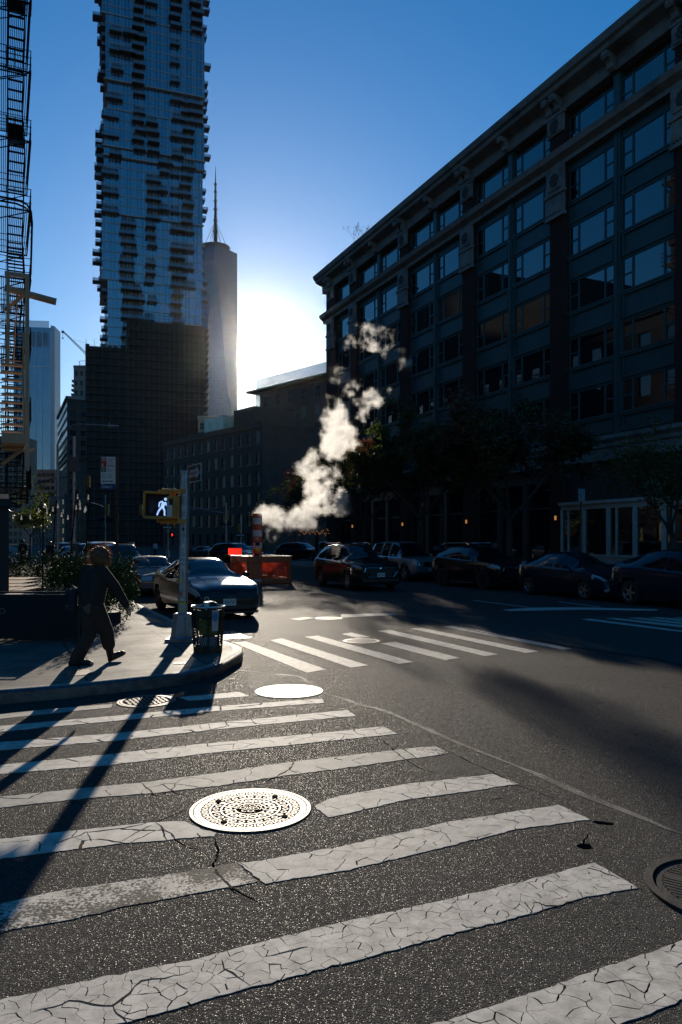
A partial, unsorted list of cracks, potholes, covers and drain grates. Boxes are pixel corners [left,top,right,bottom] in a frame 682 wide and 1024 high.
manhole cover [189,788,311,833]
manhole cover [255,684,323,699]
manhole cover [117,695,176,708]
manhole cover [644,855,682,912]
